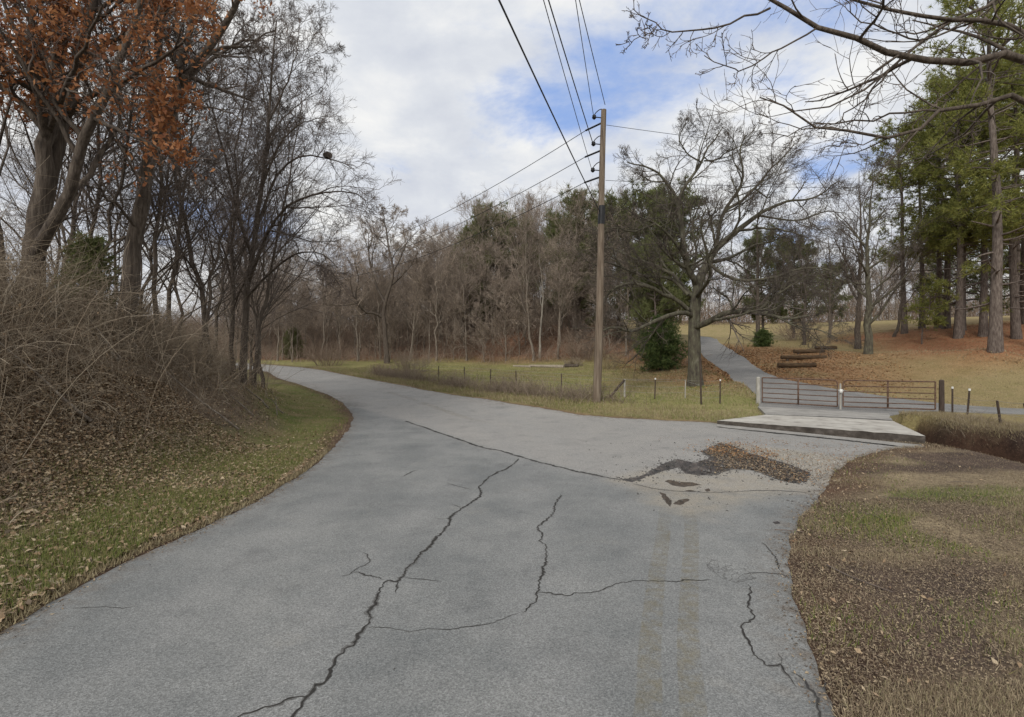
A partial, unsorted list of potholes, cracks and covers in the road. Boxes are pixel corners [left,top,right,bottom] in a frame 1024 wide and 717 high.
pothole [621,444,811,484]
crack [237,459,826,717]
